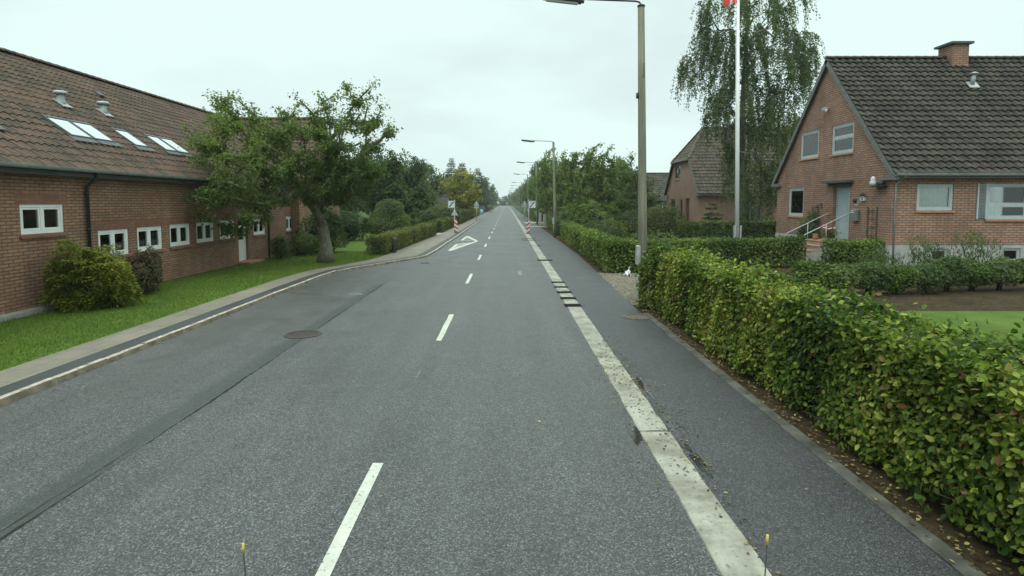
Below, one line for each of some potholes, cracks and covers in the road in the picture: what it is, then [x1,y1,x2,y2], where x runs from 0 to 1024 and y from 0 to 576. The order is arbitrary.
manhole cover [284,330,322,339]
